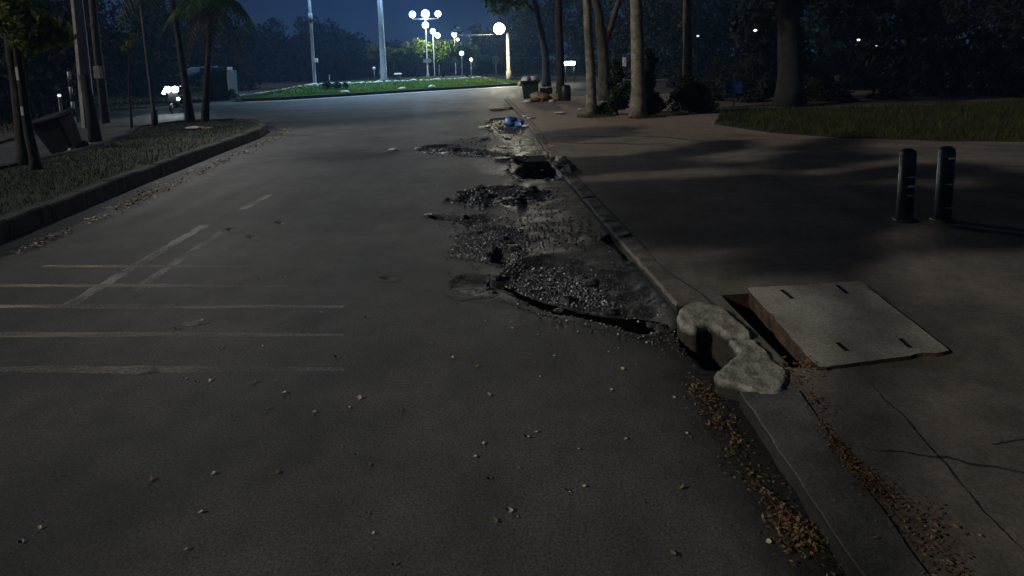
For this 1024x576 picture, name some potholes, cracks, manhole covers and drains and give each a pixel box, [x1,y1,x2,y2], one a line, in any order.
pothole [487,250,679,339]
crack [867,439,1024,473]
pothole [447,184,559,208]
pothole [439,222,532,268]
pothole [507,155,564,180]
manhole cover [748,281,949,370]
pothole [438,271,498,301]
pothole [412,144,515,158]
